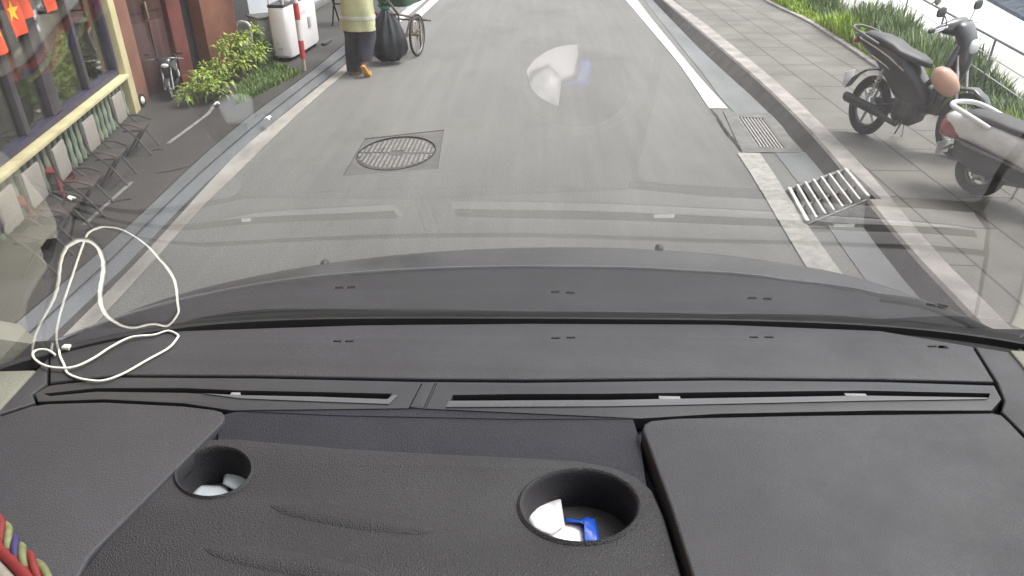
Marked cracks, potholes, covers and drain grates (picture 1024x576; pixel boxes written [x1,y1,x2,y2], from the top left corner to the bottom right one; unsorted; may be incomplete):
manhole cover [344,131,444,176]
drain grate [787,168,870,231]
drain grate [723,111,800,153]
